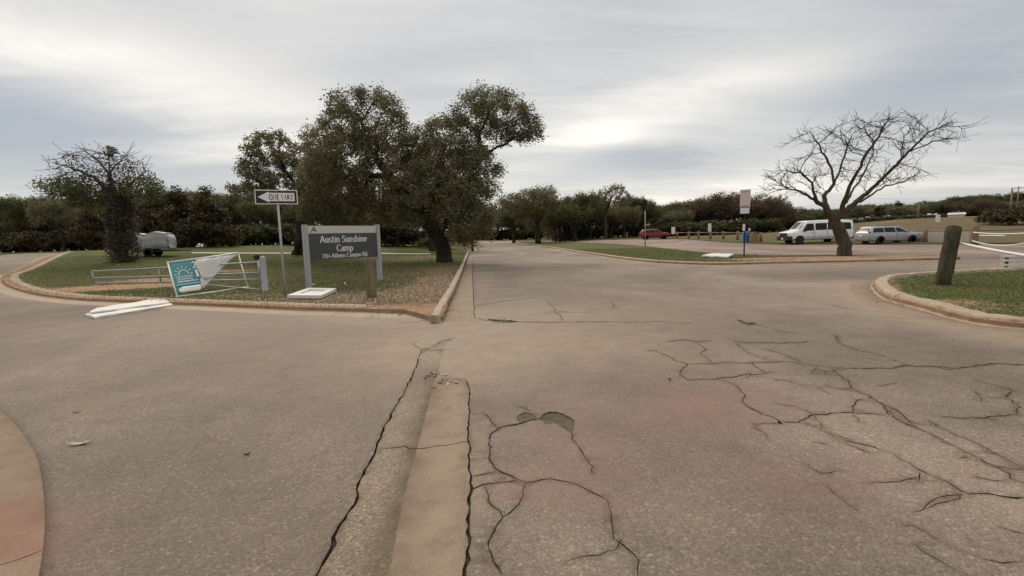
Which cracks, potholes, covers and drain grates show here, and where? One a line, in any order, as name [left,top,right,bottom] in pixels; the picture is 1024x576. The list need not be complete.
pothole [540,411,574,433]
pothole [517,412,535,423]
crack [650,325,1024,570]
crack [383,381,639,576]
